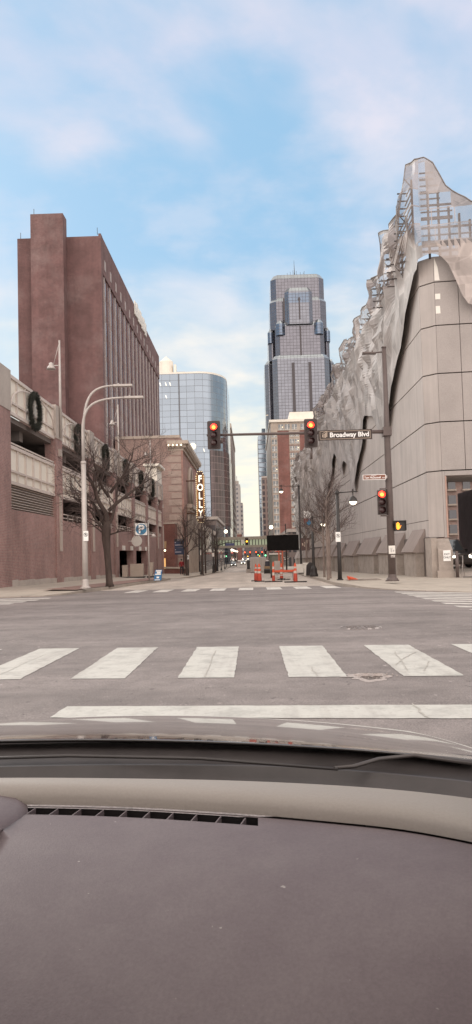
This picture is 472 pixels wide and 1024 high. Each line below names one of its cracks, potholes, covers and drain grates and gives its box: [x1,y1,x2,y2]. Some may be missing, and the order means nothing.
pothole [346,673,398,682]
